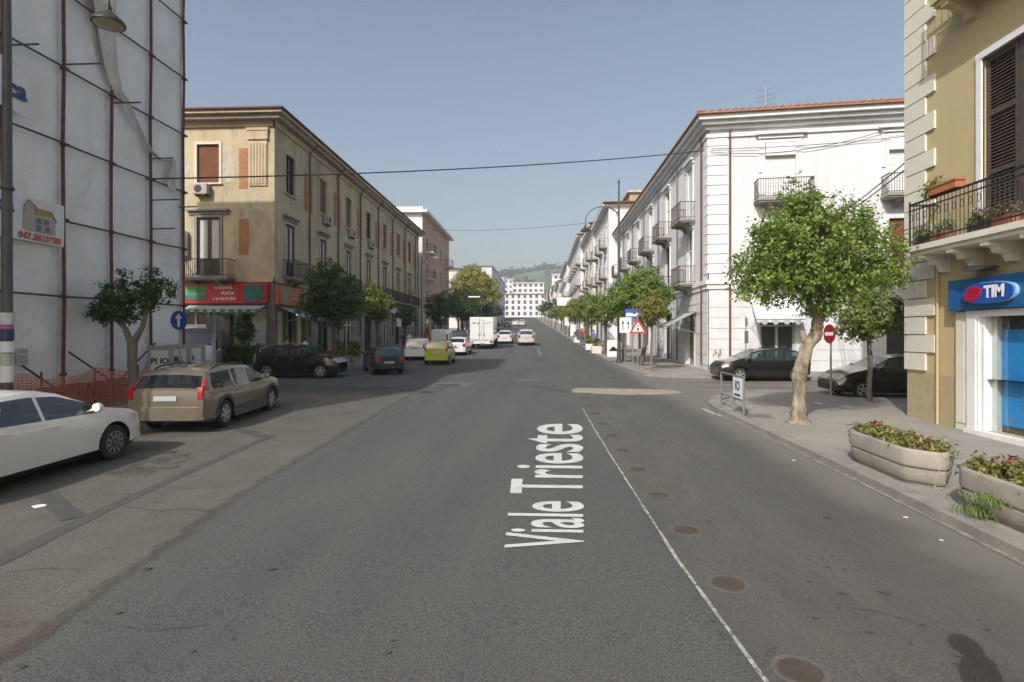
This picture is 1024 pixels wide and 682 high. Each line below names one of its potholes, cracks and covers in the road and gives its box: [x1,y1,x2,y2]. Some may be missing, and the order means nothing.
manhole cover [707,574,750,593]
manhole cover [769,654,832,682]
manhole cover [644,491,672,499]
manhole cover [670,524,703,536]
